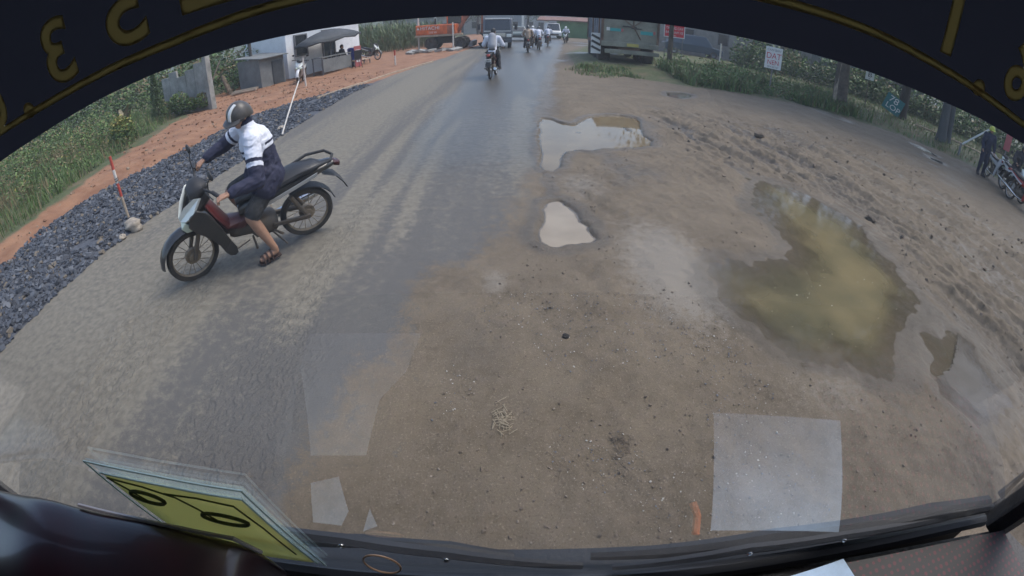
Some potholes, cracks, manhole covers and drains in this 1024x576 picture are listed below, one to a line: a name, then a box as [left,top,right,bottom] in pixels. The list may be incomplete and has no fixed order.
pothole [681,173,958,400]
pothole [531,113,661,175]
pothole [929,324,1018,435]
pothole [527,194,609,252]
